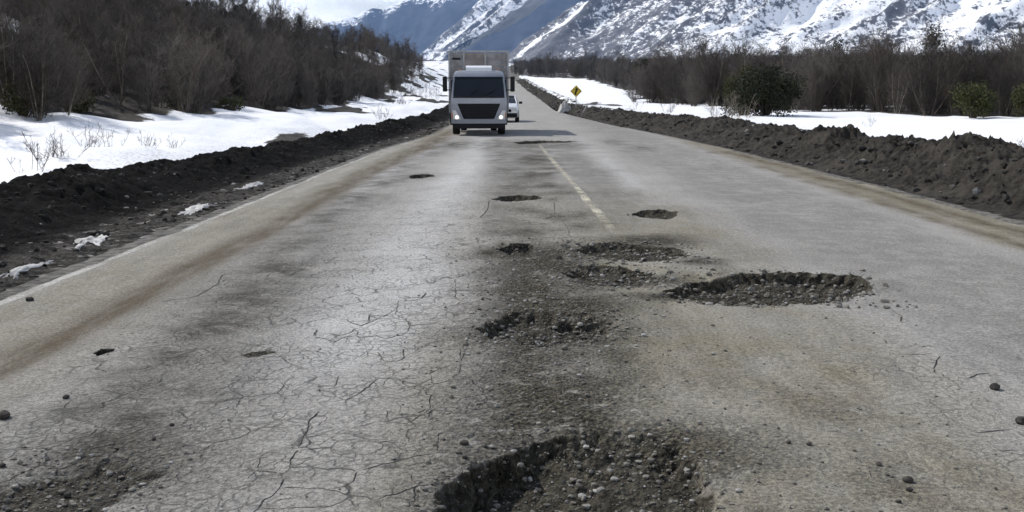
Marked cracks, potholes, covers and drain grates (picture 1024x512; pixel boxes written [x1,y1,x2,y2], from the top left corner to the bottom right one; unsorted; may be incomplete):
pothole [631,209,681,220]
pothole [562,265,660,288]
pothole [568,242,695,263]
pothole [658,271,878,308]
pothole [236,348,280,359]
pothole [93,348,115,357]
pothole [430,428,730,512]
crack [166,276,467,512]
pothole [474,310,629,349]
pothole [496,243,539,258]
